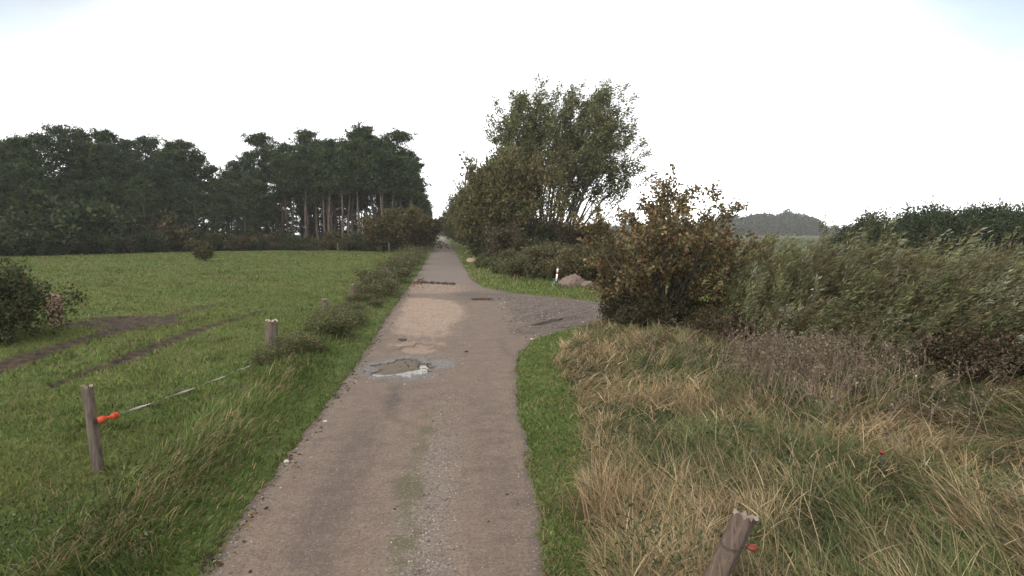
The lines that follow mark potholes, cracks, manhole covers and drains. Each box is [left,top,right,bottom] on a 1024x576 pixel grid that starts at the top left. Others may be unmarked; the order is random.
pothole [393,343,439,355]
pothole [370,358,438,377]
